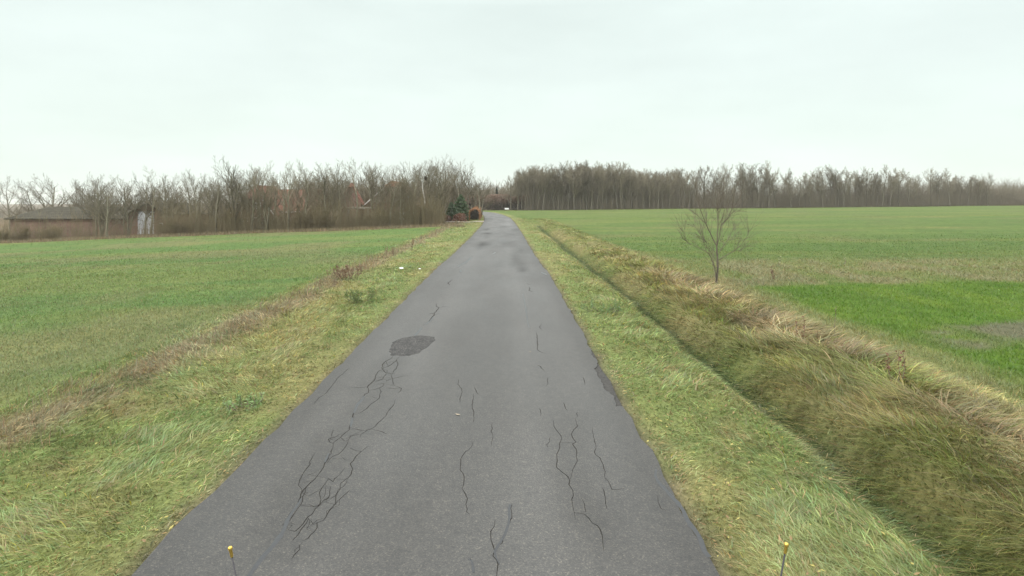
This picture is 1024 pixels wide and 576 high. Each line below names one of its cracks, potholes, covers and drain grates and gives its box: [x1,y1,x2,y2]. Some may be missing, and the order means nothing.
crack [468,504,512,576]
crack [460,443,473,512]
crack [523,272,548,385]
crack [247,356,402,576]
crack [540,404,619,550]
